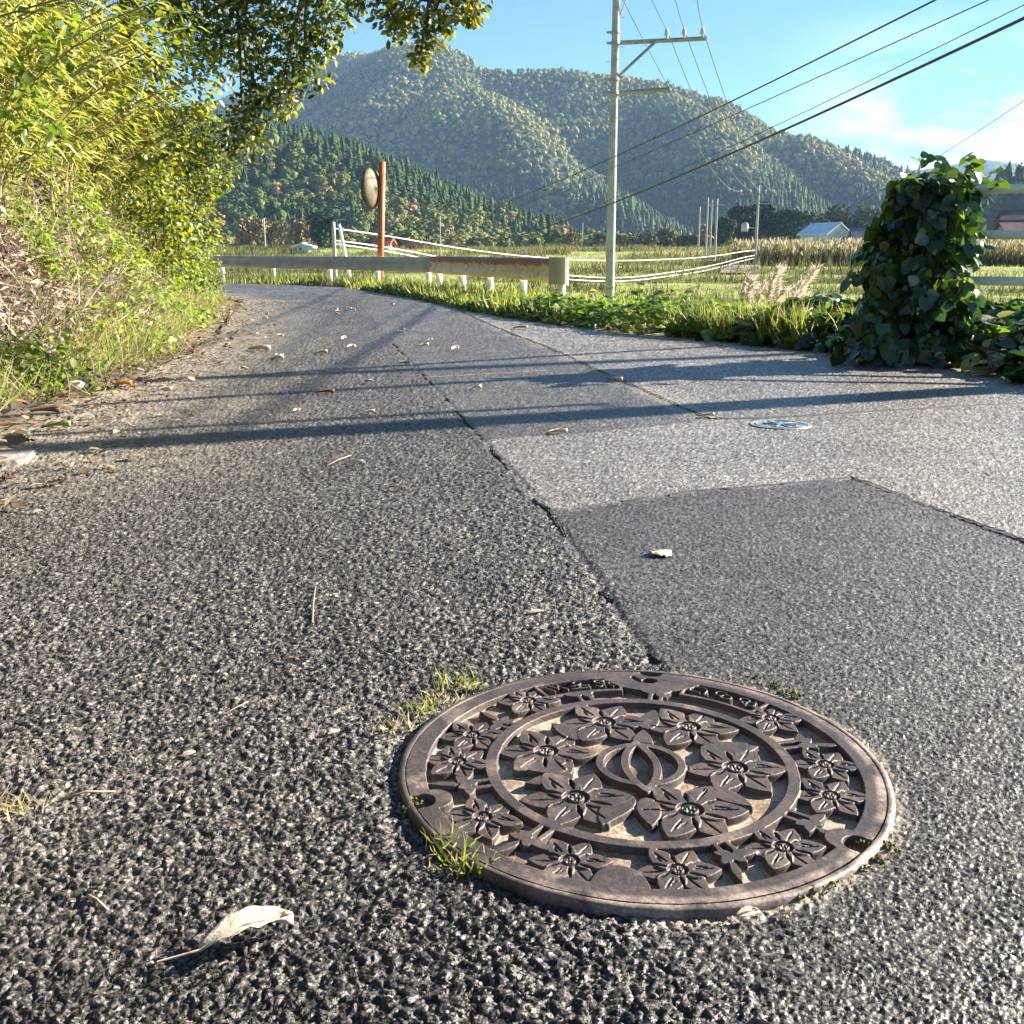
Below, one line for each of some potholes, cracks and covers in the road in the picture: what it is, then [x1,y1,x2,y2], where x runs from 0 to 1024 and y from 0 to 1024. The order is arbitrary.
manhole cover [749,419,812,430]
manhole cover [398,670,896,921]
